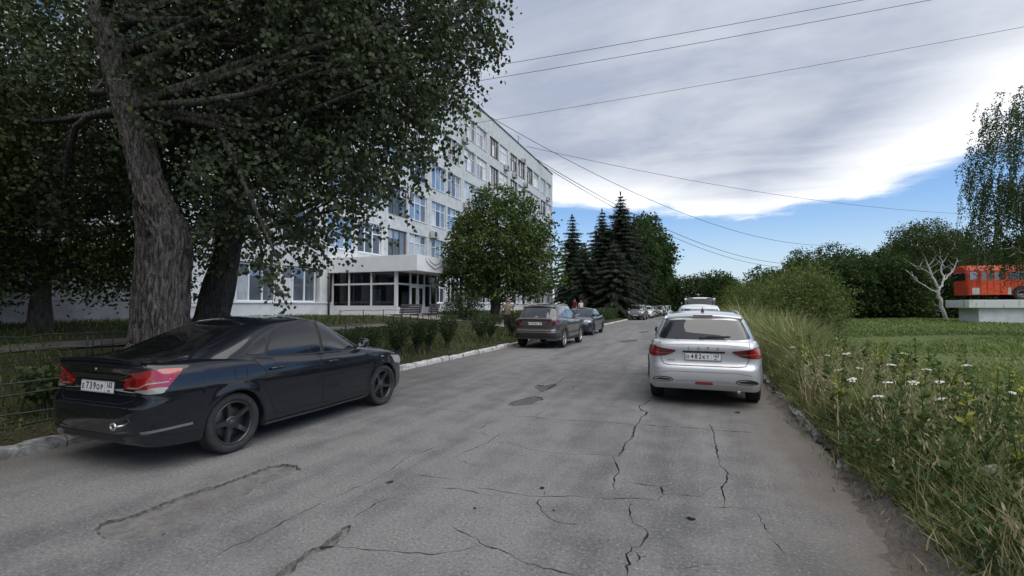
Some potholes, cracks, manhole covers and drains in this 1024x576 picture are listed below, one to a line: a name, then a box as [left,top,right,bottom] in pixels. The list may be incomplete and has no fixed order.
pothole [507,396,543,406]
crack [352,367,756,575]
